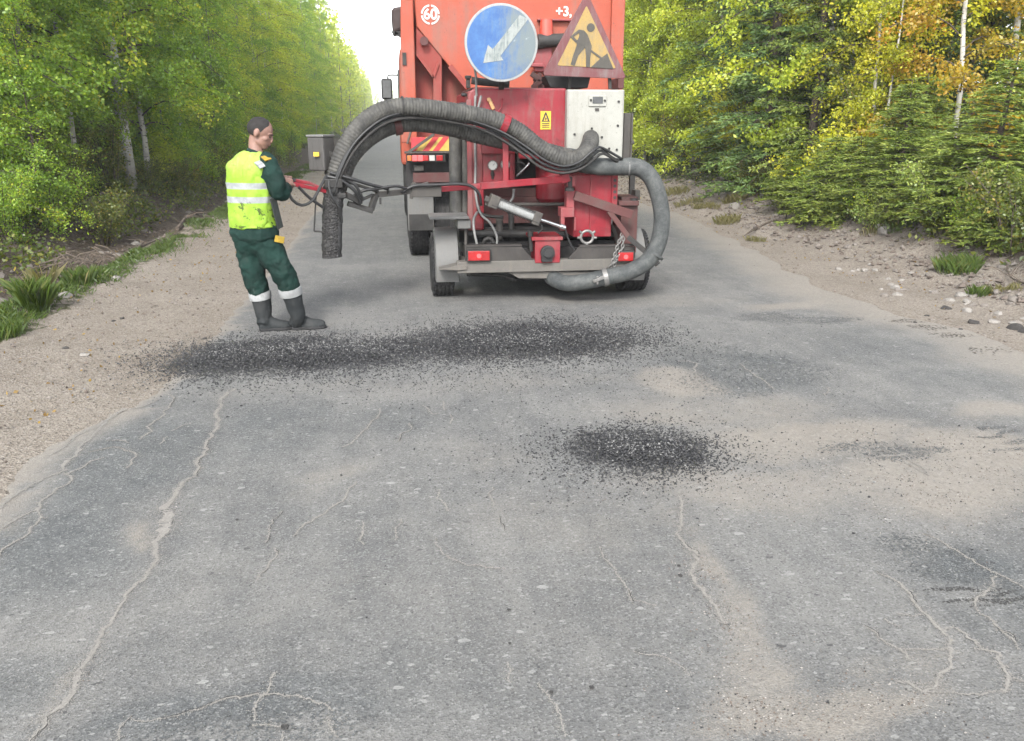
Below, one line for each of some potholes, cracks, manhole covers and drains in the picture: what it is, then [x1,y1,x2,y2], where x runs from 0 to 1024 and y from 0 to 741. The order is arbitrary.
crack [0,388,339,741]
crack [864,533,1024,699]
crack [669,491,731,624]
crack [256,481,373,580]
